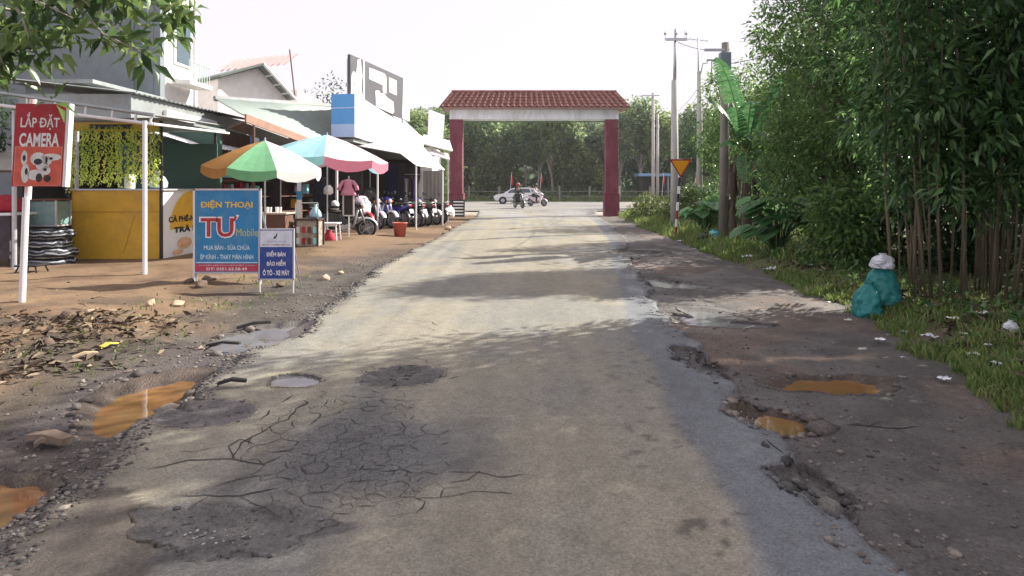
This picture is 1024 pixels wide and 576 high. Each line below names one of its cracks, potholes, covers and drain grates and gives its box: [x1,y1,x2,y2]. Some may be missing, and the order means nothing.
pothole [0,465,64,531]
pothole [59,364,217,446]
pothole [197,316,321,357]
pothole [760,455,865,526]
pothole [148,398,261,431]
pothole [719,393,841,441]
pothole [667,343,734,382]
crack [149,387,521,524]
pothole [754,371,908,396]
pothole [355,364,447,389]
pothole [126,499,338,564]
pothole [266,372,325,388]
